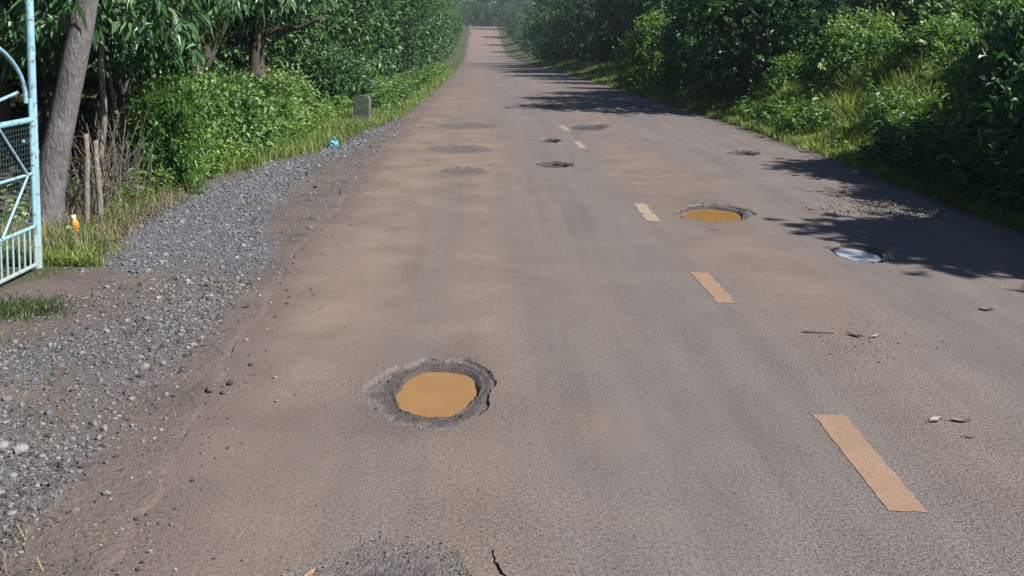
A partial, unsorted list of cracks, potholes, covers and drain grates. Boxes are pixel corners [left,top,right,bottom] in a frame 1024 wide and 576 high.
pothole [675,202,757,223]
pothole [355,357,501,430]
pothole [437,166,486,176]
crack [491,550,507,576]
pothole [828,243,891,263]
